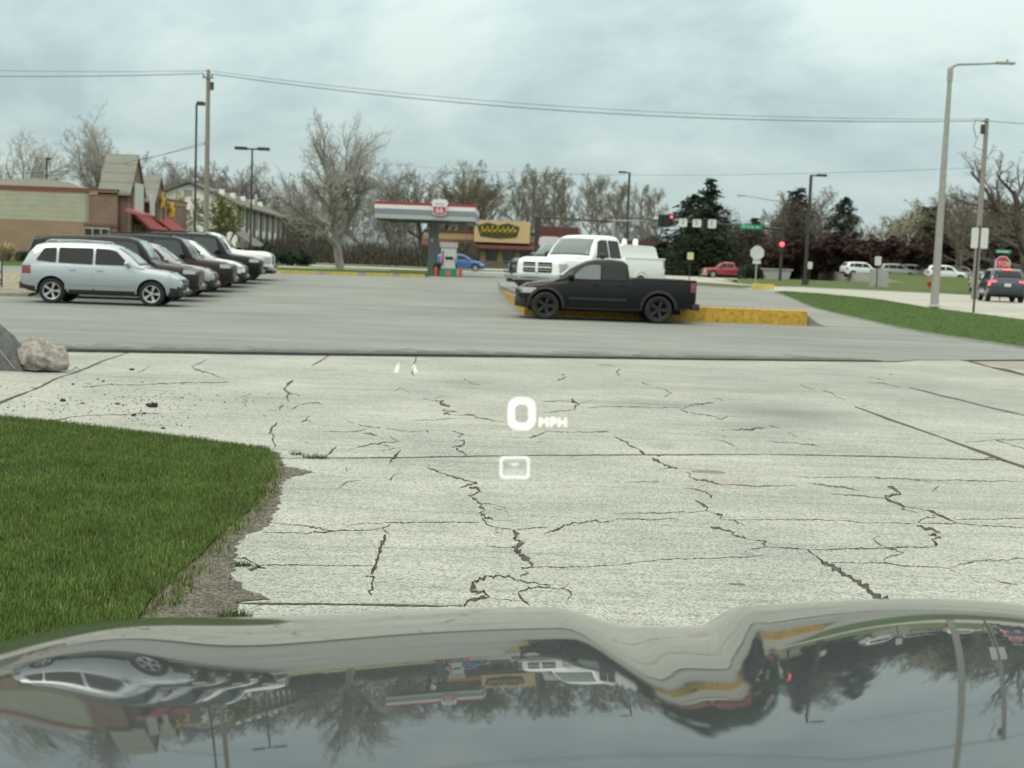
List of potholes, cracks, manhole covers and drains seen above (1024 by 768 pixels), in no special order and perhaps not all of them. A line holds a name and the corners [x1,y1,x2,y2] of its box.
crack [267,357,506,488]
crack [530,431,808,552]
crack [977,439,1024,449]
crack [803,476,1024,572]
crack [544,382,826,450]
crack [262,465,762,607]
crack [230,557,372,614]
